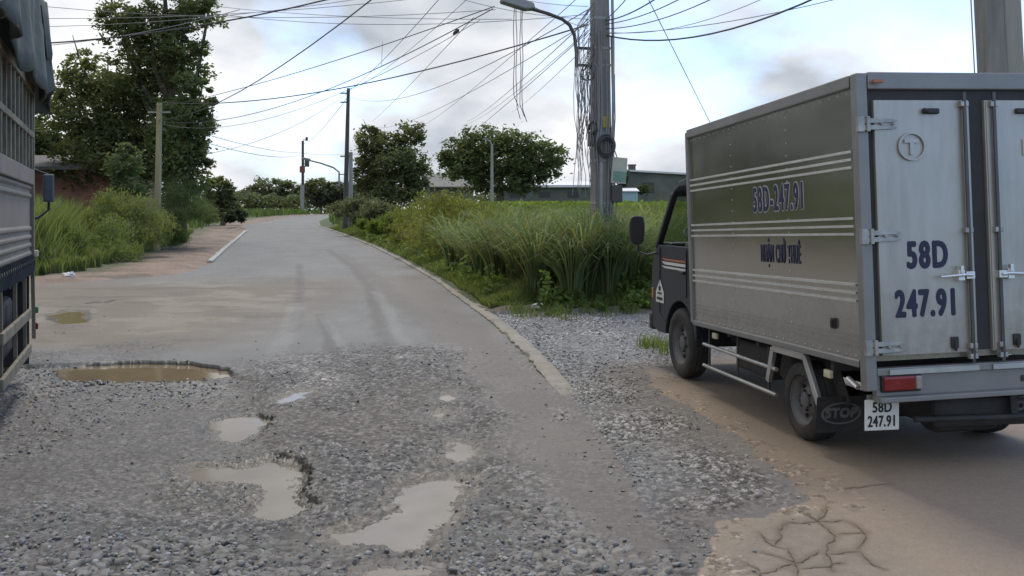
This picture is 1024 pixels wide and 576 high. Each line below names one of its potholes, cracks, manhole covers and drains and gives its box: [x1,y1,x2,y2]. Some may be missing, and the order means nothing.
pothole [46,309,90,324]
pothole [169,454,317,522]
pothole [51,361,232,383]
pothole [308,470,486,554]
crack [748,507,884,576]
pothole [204,414,273,446]
pothole [425,435,485,465]
pothole [265,387,321,404]
